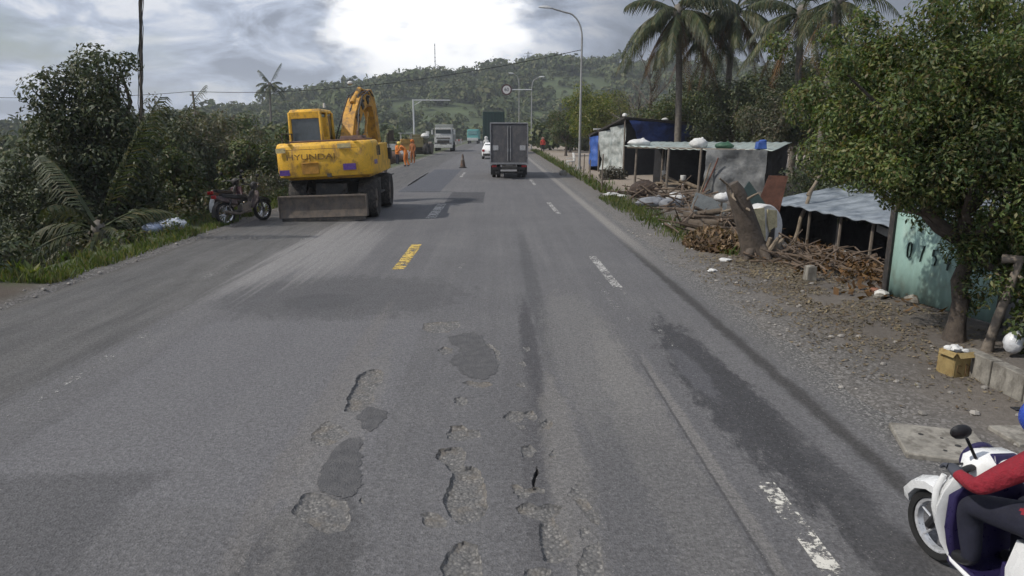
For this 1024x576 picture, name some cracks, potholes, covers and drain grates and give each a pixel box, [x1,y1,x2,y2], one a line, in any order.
pothole [344,369,384,414]
crack [531,466,539,490]
pothole [446,425,481,441]
pothole [291,492,351,534]
pothole [512,484,545,499]
pothole [435,447,489,525]
pothole [575,541,605,576]
pothole [567,482,600,526]
pothole [502,410,537,423]
pothole [579,526,591,541]
pothole [439,541,483,576]
